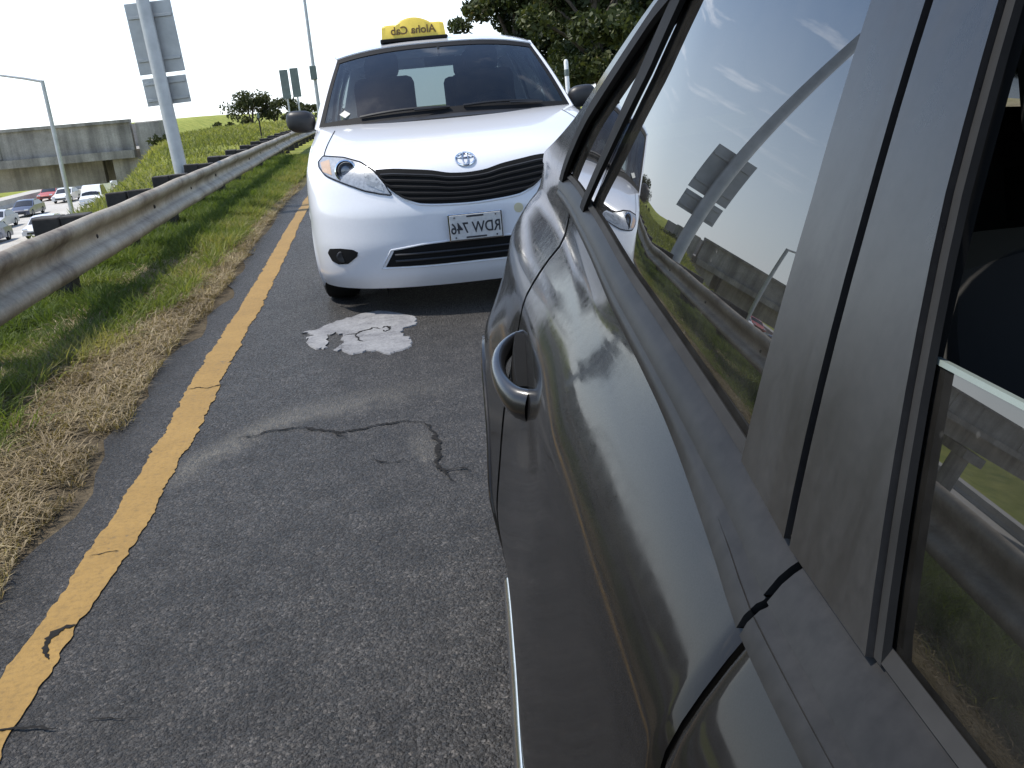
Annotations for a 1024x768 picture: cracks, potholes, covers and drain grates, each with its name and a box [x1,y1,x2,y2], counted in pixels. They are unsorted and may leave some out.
crack [239,420,470,482]
